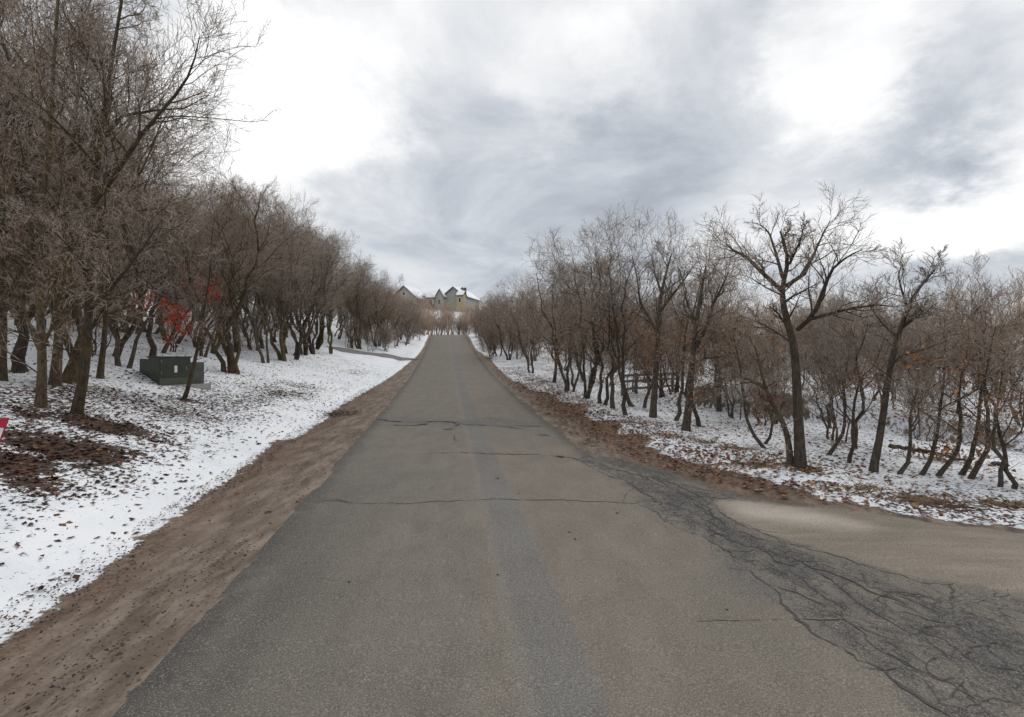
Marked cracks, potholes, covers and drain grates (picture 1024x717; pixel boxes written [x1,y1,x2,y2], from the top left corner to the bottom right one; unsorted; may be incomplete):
crack [320,418,1024,717]
